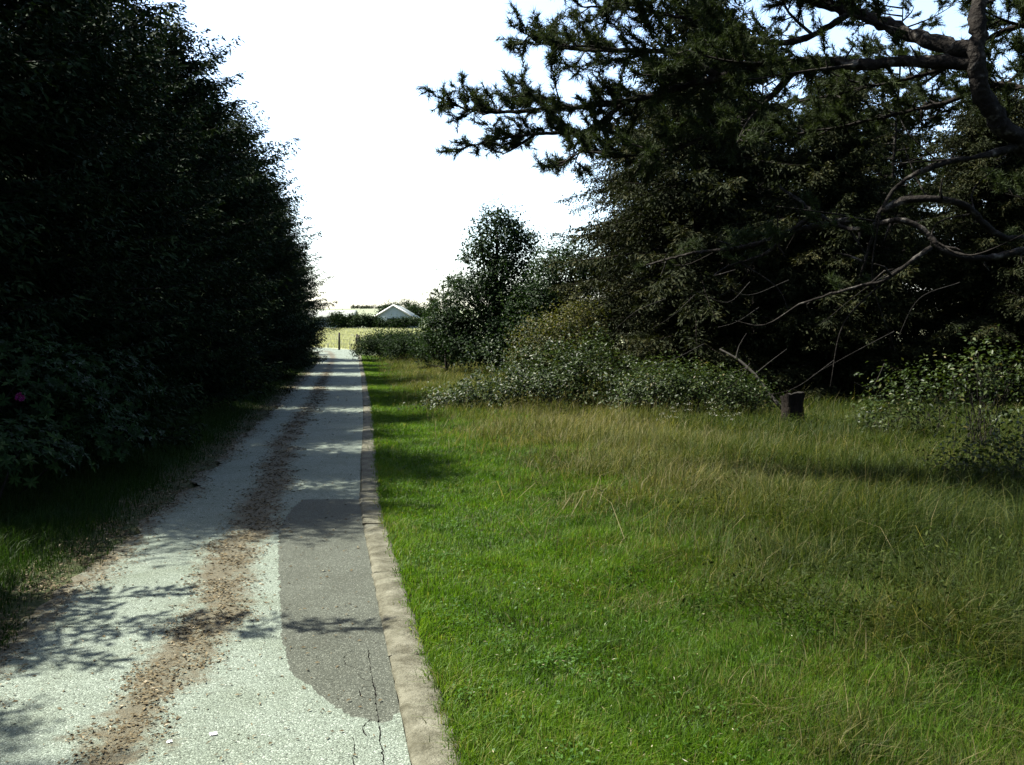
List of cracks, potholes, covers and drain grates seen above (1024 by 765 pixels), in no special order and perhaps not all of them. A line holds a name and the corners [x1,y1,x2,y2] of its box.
crack [321,650,384,765]
